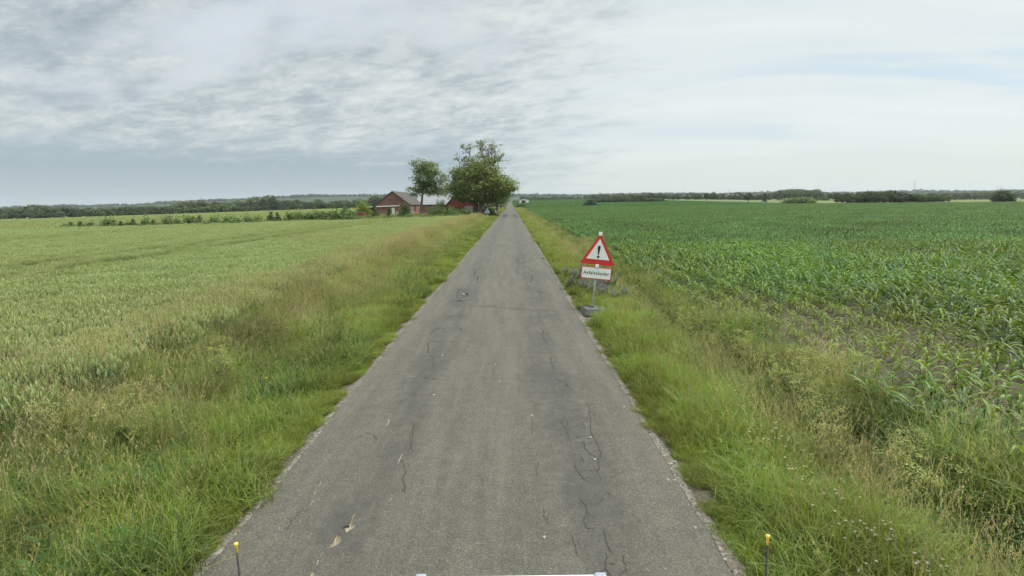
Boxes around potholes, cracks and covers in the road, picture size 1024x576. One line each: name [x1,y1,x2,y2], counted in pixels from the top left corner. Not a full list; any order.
crack [543,492,633,576]
crack [352,399,415,500]
crack [537,330,626,480]
crack [424,258,562,379]
